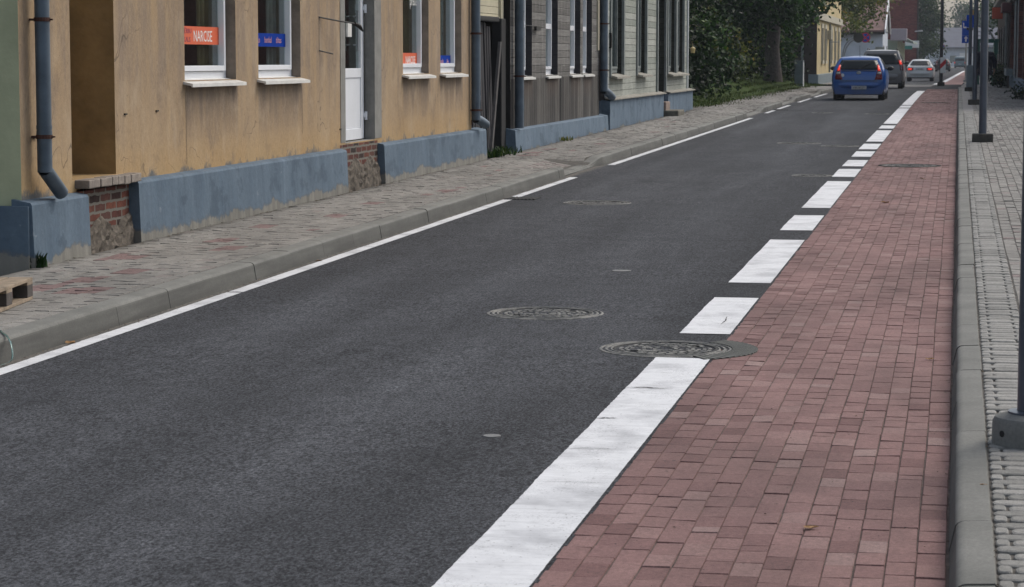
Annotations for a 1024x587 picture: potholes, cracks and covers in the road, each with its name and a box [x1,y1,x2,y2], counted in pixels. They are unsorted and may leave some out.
manhole cover [599,340,758,360]
manhole cover [487,306,604,320]
